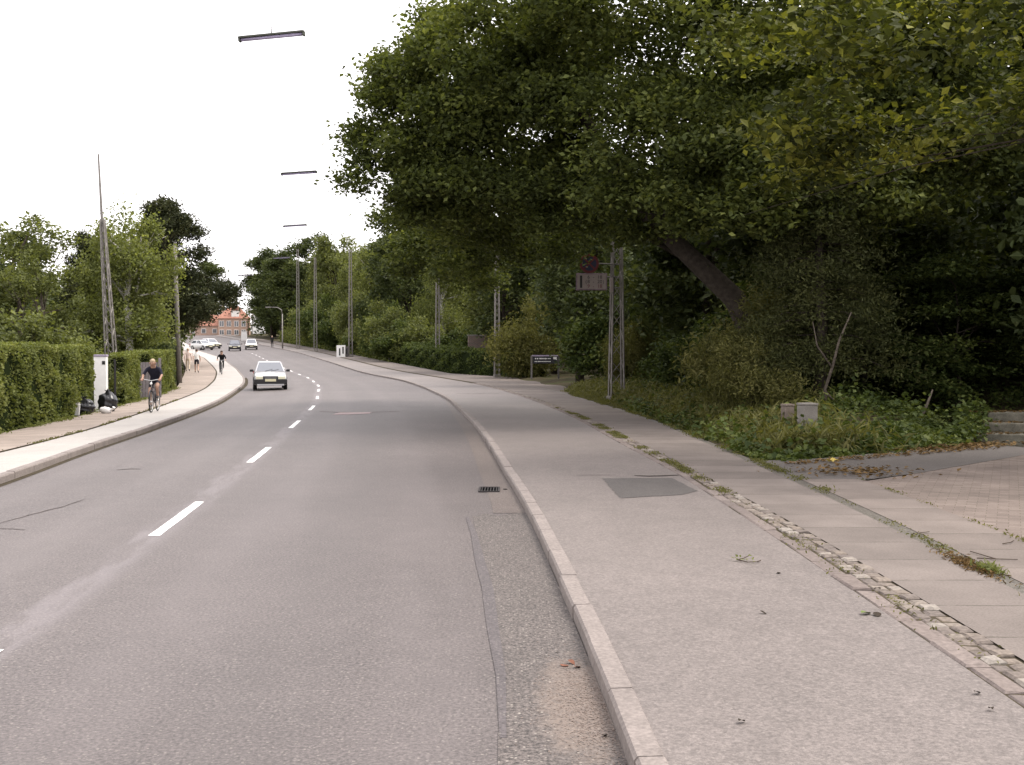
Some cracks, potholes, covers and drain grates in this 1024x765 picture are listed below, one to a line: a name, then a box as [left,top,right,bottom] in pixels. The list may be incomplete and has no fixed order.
crack [0,499,84,530]
